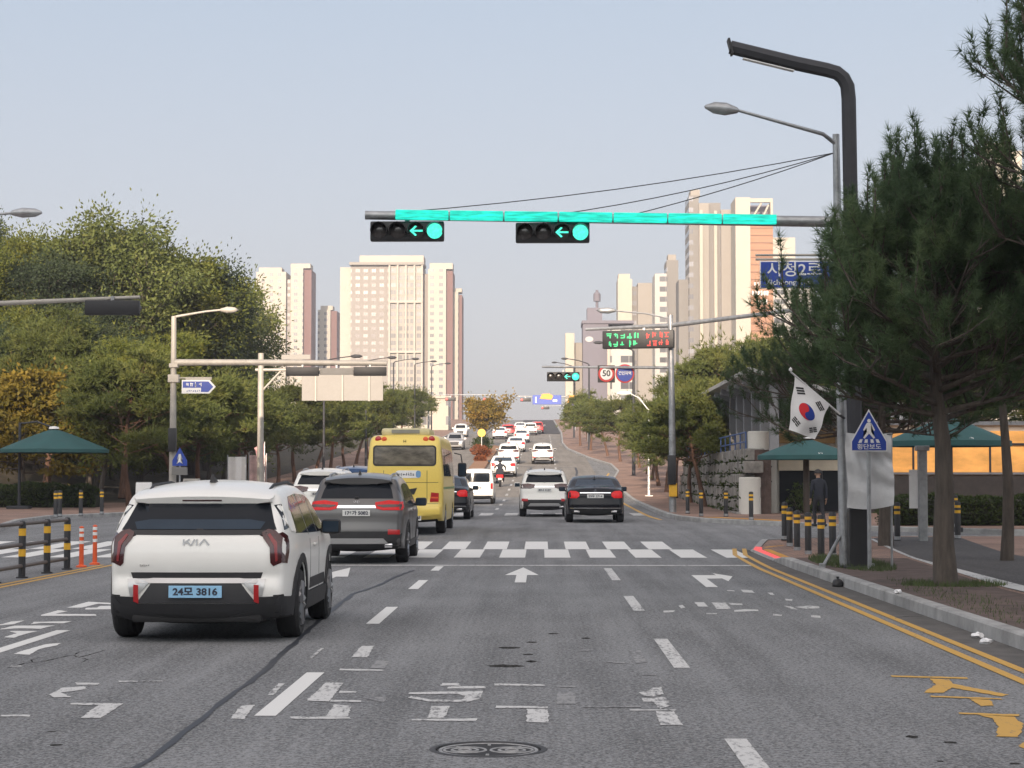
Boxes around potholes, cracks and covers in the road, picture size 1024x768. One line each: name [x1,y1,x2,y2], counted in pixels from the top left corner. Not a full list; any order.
manhole cover [429,741,548,758]
crack [8,650,105,668]
